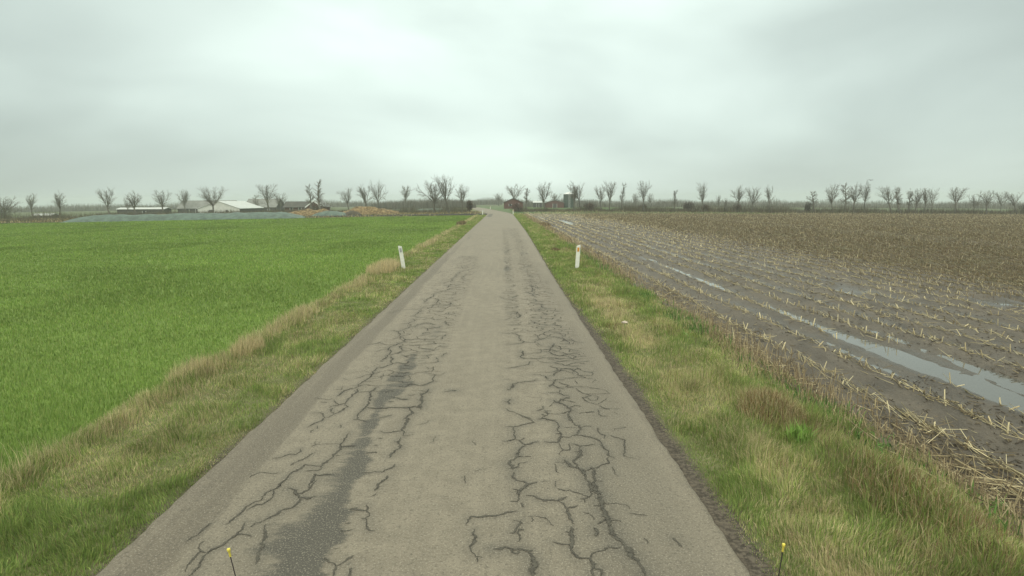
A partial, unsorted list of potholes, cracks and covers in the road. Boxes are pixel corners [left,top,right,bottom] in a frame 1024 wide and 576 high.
crack [466,279,682,576]
crack [504,228,547,282]
crack [186,256,480,576]
